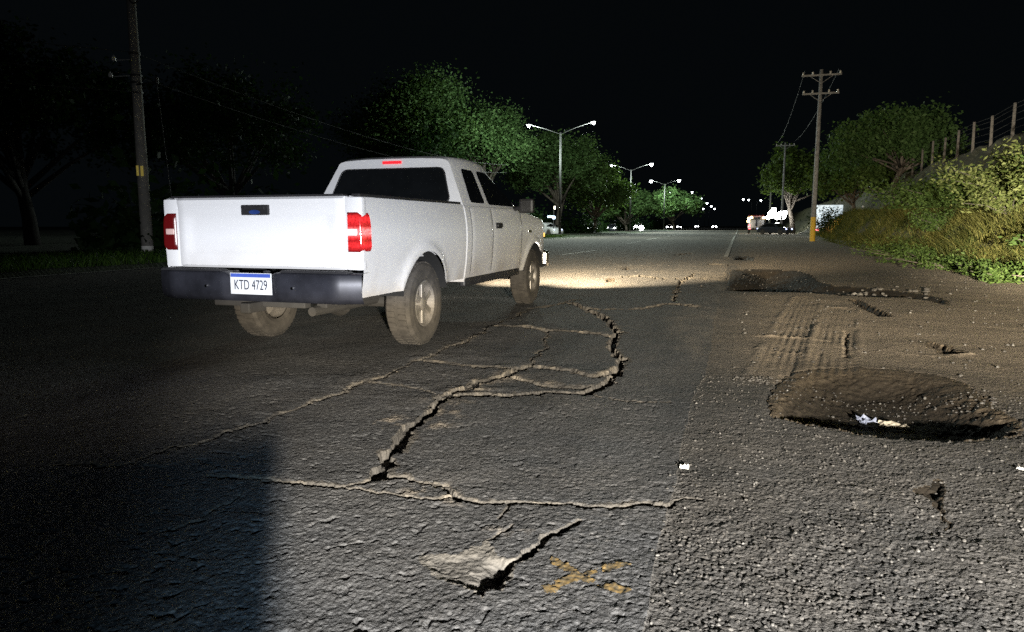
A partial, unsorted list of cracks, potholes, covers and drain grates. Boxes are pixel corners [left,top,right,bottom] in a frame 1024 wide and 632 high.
pothole [766,367,1024,442]
crack [51,253,730,562]
pothole [725,269,949,305]
pothole [919,341,964,354]
pothole [848,300,892,317]
